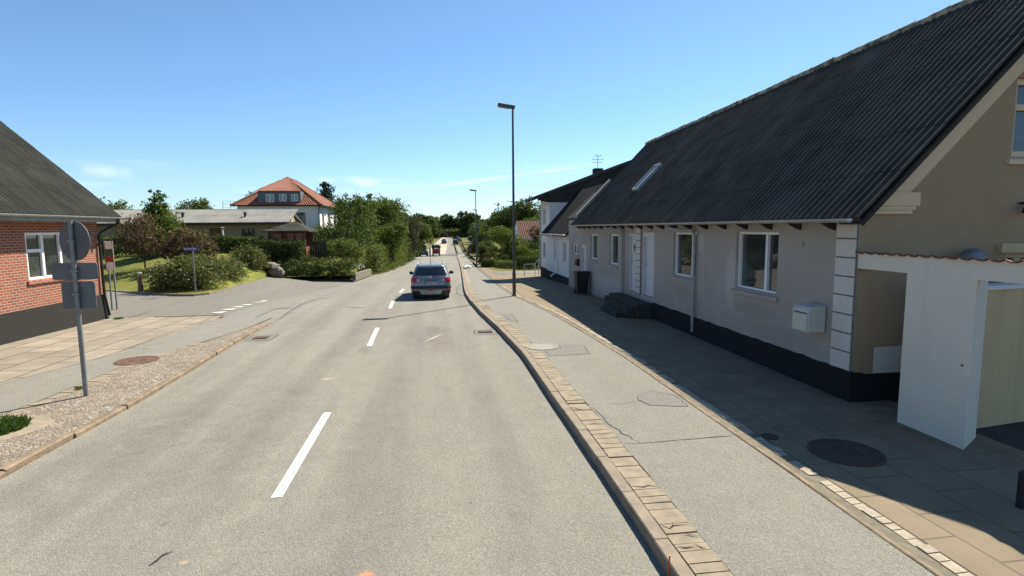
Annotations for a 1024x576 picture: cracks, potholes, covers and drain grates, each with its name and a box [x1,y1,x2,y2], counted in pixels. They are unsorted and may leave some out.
manhole cover [114,356,160,365]
manhole cover [807,438,887,467]
manhole cover [526,343,558,351]
